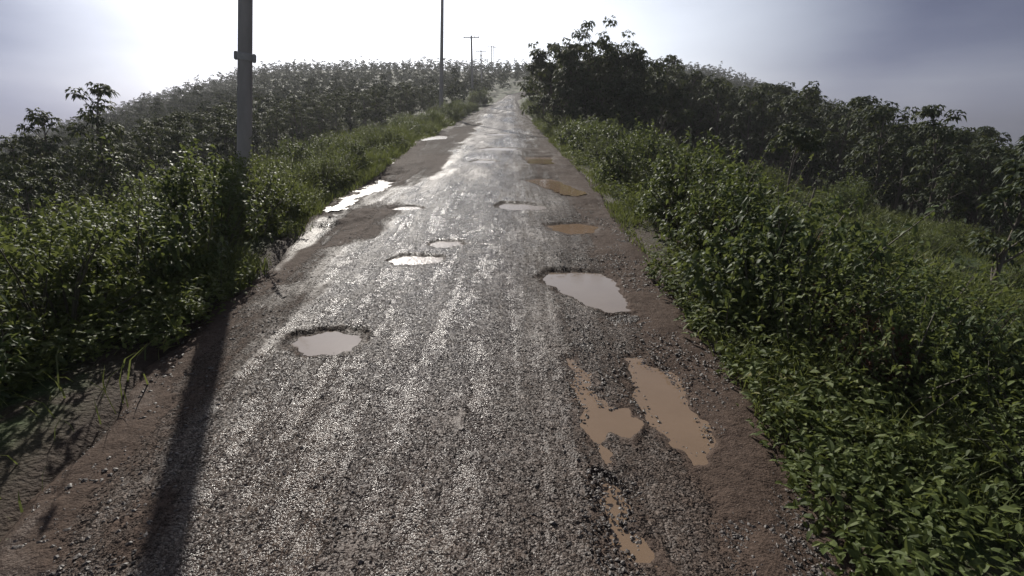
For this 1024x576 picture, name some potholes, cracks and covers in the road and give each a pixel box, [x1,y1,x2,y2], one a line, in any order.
pothole [616,351,728,470]
pothole [542,221,603,235]
pothole [492,200,552,210]
pothole [519,176,592,197]
pothole [532,266,638,319]
pothole [561,353,646,475]
pothole [273,322,376,359]
pothole [313,173,406,218]
pothole [424,237,470,248]
pothole [585,465,680,576]
pothole [382,251,450,266]
